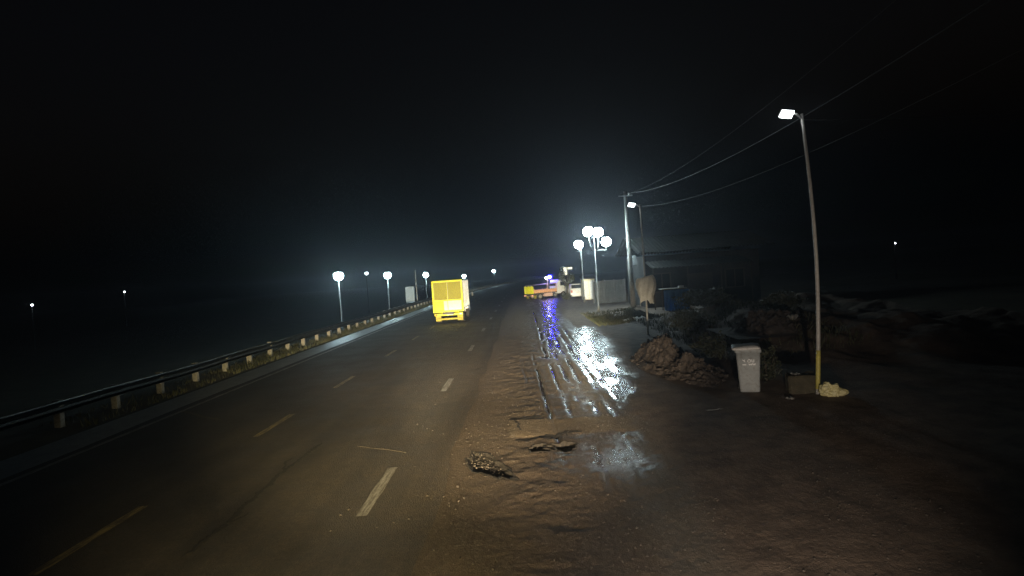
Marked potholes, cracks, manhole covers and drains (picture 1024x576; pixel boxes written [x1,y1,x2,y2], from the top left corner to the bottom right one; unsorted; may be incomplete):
pothole [464,451,520,481]
pothole [528,443,558,453]
pothole [543,441,579,453]
